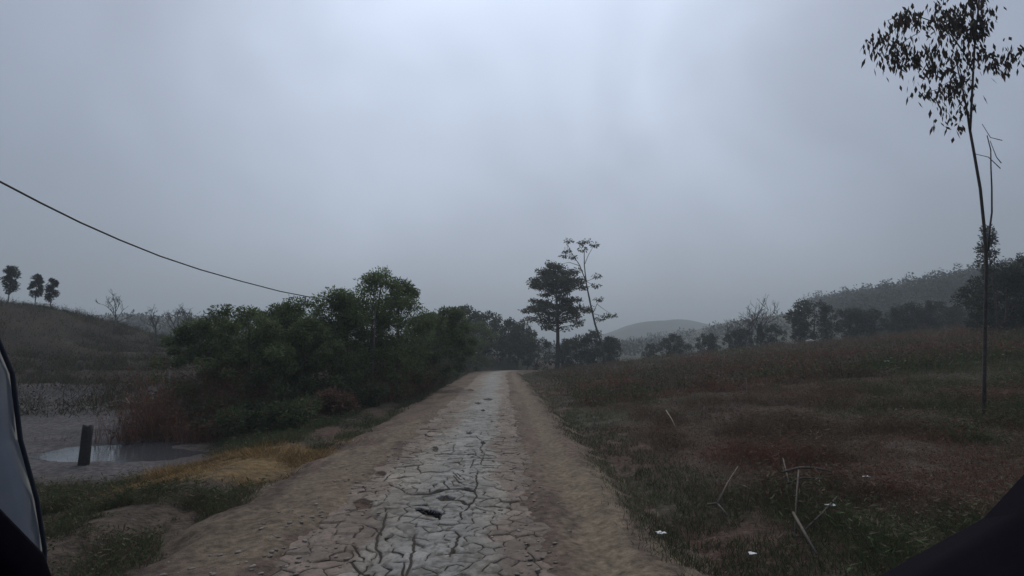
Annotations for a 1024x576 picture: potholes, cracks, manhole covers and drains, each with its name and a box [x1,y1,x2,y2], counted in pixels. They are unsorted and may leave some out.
crack [270,401,546,576]
pothole [354,499,372,510]
